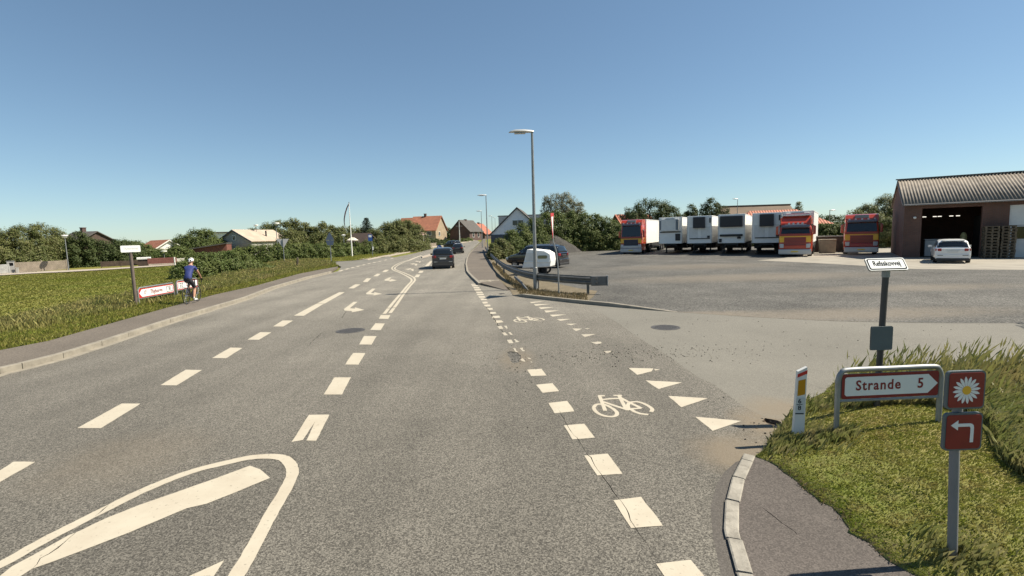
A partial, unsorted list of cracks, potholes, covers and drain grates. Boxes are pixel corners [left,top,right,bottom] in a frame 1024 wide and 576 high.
pothole [507,351,521,363]
